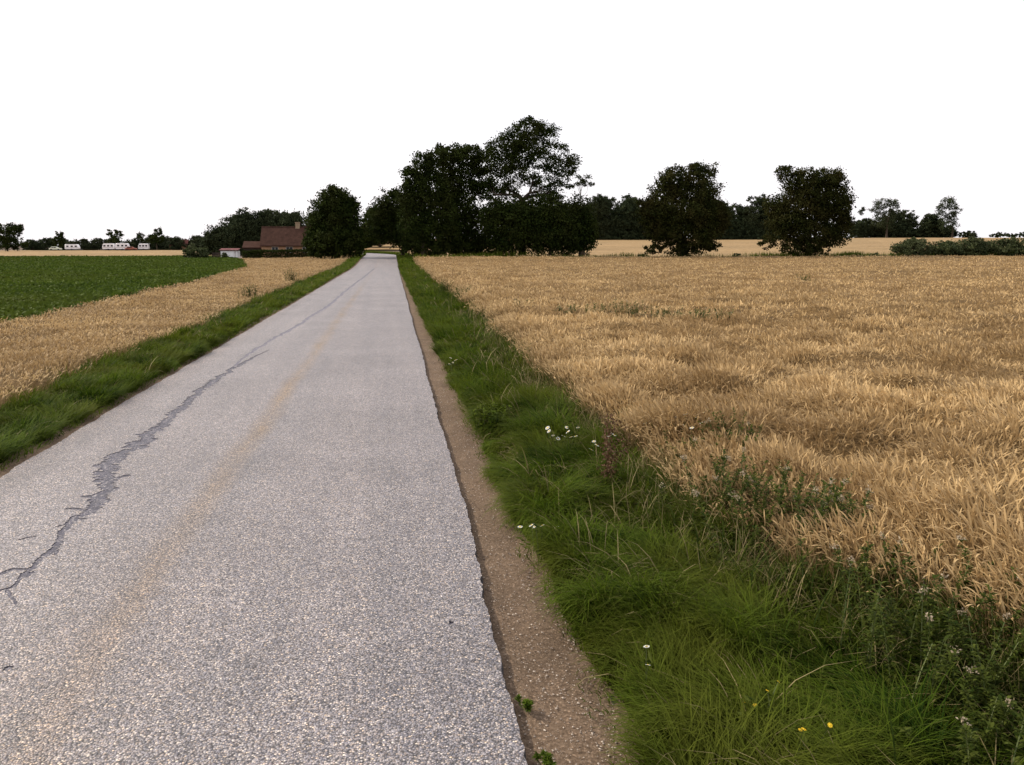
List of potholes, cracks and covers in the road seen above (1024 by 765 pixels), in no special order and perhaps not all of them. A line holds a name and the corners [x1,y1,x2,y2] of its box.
crack [0,268,375,605]
